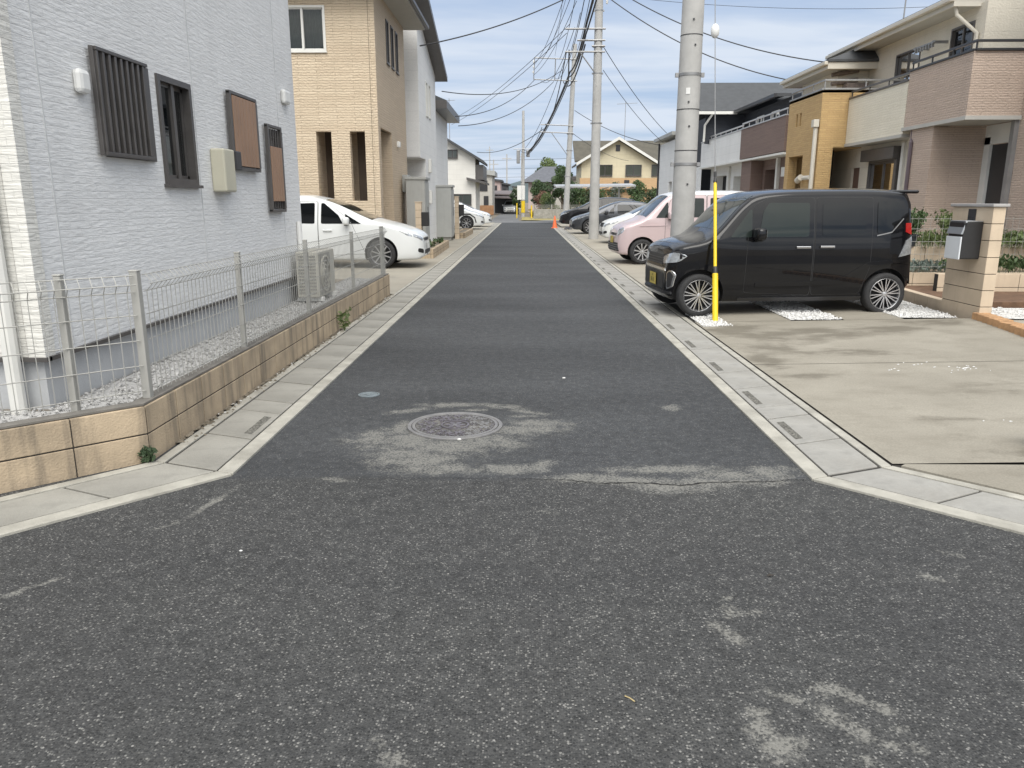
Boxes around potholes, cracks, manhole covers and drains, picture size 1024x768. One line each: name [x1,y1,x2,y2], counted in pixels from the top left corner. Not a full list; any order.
manhole cover [407,412,503,440]
crack [322,477,804,486]
